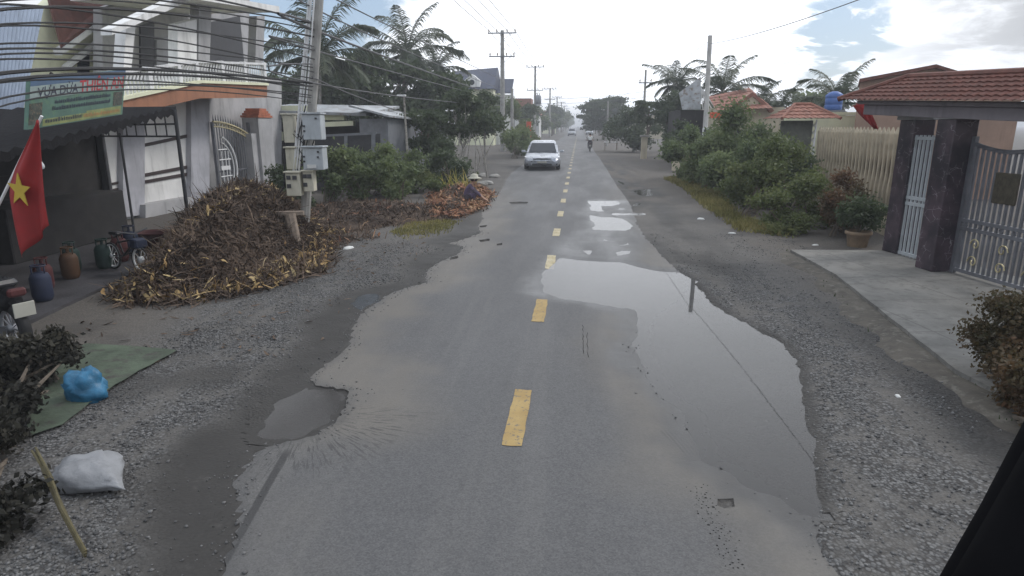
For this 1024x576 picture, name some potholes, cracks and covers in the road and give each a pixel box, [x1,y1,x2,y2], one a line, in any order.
pothole [241,382,349,446]
